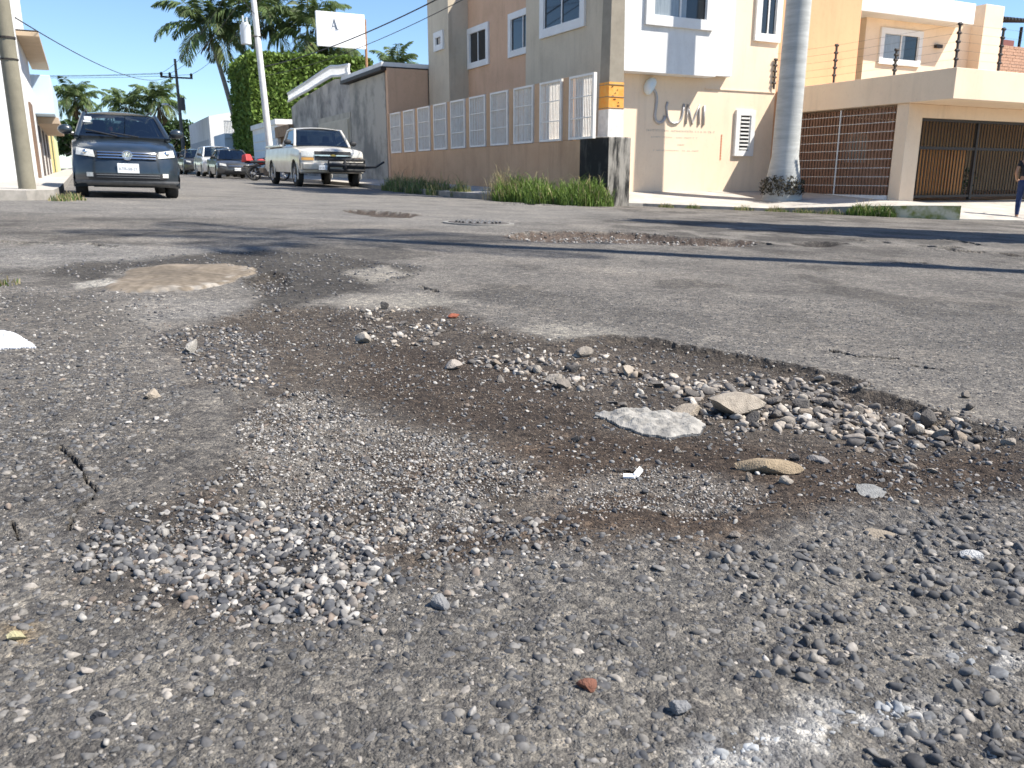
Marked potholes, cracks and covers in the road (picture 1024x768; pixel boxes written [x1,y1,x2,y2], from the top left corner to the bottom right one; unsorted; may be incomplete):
crack [829,349,939,370]
pothole [343,209,421,218]
pothole [76,305,1024,631]
crack [60,445,97,531]
pothole [502,231,761,247]
